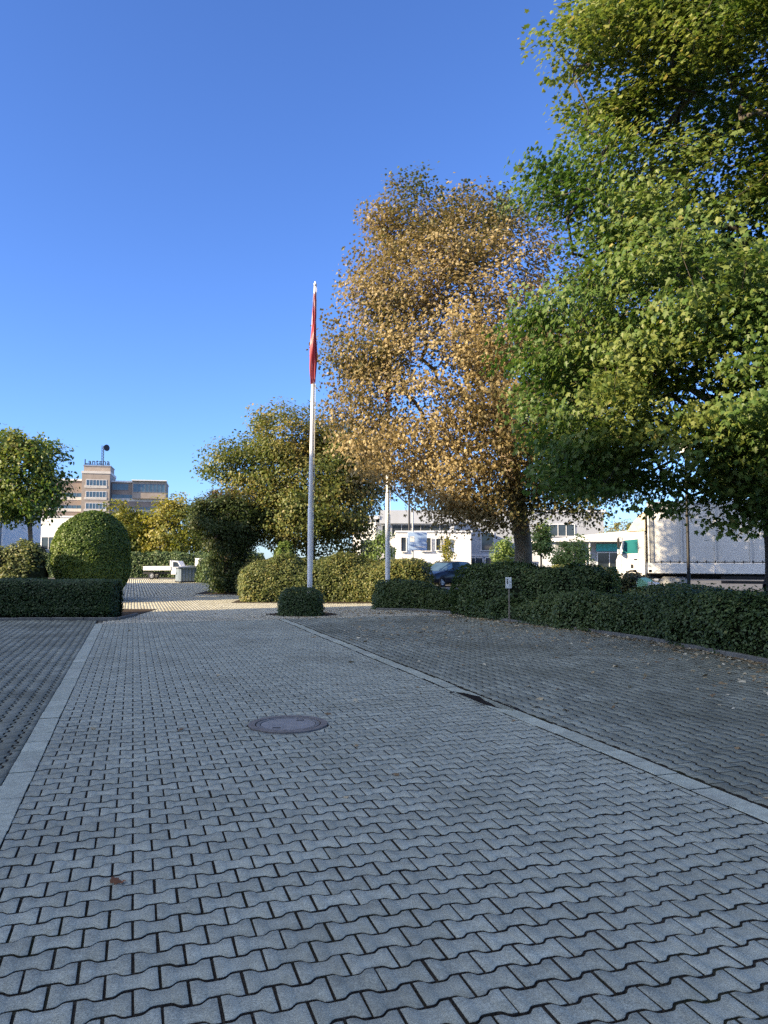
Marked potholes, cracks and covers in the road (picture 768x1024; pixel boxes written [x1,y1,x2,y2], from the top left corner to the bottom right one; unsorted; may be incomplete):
manhole cover [248,715,328,734]
